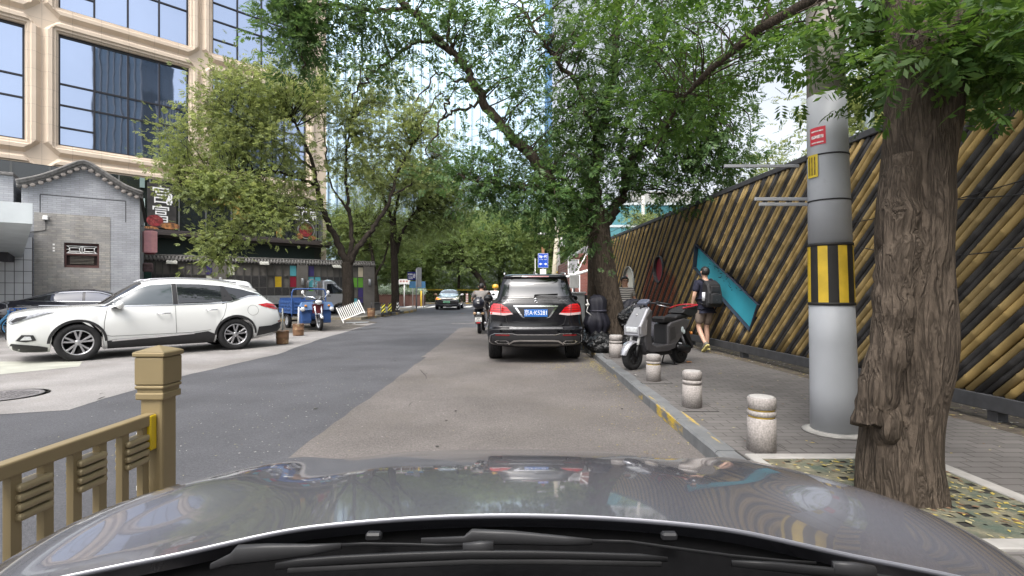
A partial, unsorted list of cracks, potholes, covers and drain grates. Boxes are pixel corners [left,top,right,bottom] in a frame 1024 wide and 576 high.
manhole cover [0,389,51,401]
